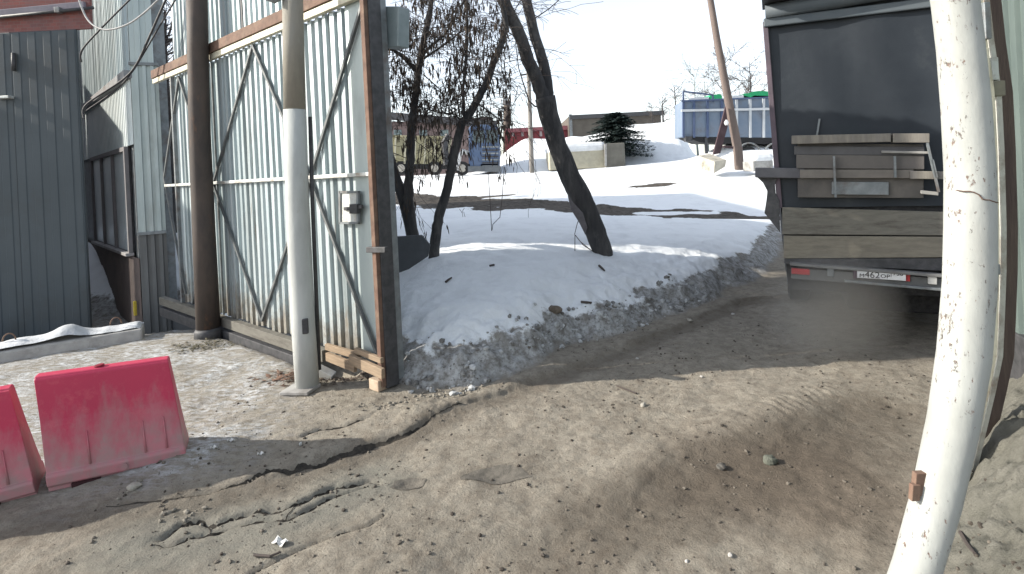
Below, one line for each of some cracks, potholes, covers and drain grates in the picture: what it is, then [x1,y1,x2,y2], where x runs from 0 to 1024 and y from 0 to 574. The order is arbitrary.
crack [106,403,462,548]
